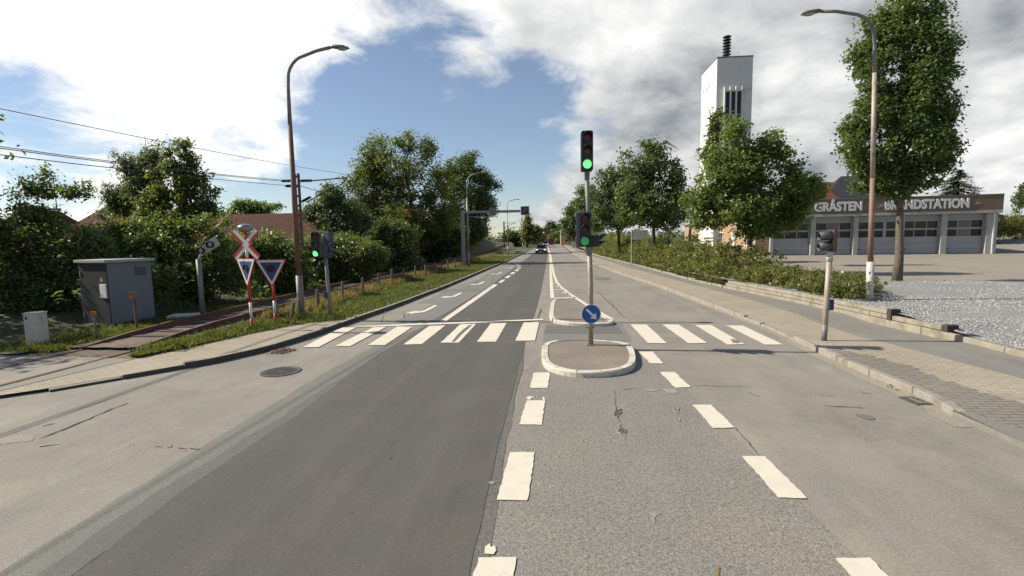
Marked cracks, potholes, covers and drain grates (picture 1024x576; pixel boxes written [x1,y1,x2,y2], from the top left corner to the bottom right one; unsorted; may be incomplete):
manhole cover [260,366,302,377]
drain grate [898,396,933,405]
crack [41,398,127,438]
